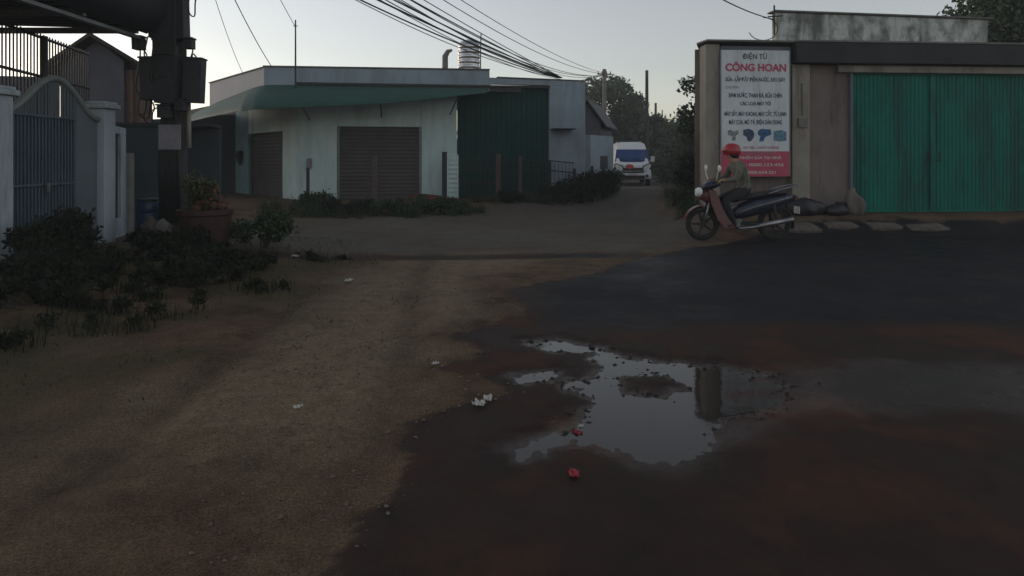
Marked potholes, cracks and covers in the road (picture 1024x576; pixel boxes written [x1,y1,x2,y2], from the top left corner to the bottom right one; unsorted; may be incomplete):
pothole [477,333,833,473]
